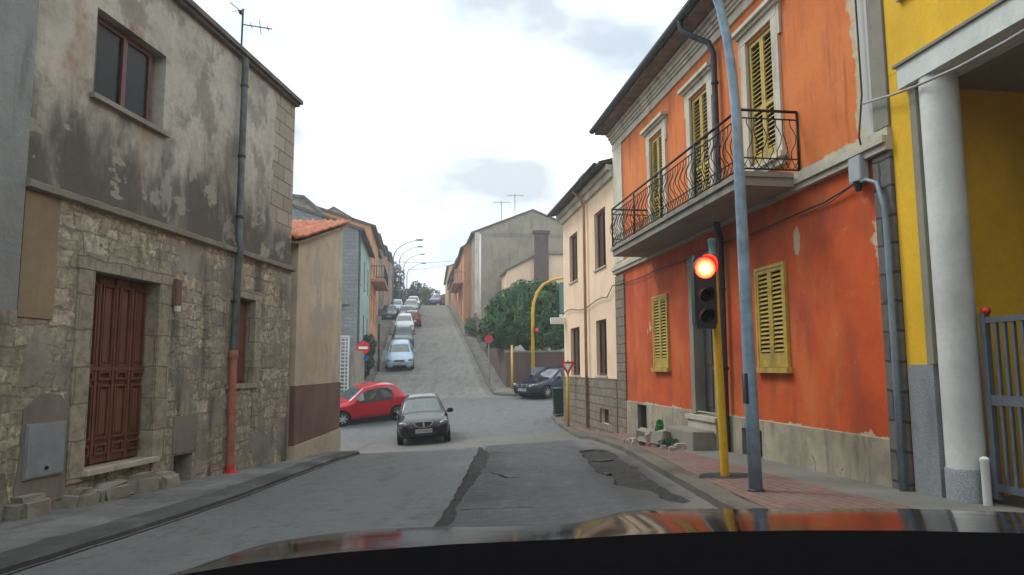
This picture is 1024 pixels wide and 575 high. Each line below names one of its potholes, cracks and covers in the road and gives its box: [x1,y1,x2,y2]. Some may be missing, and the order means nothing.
crack [433,447,530,527]
